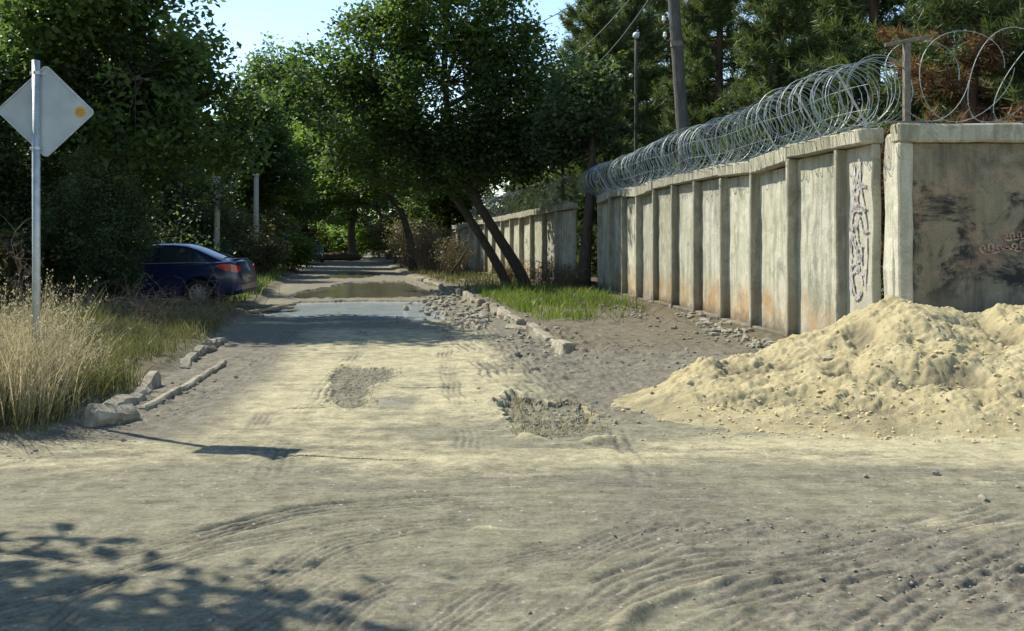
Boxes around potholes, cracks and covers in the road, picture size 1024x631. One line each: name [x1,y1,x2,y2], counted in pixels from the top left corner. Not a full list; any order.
crack [264,453,425,462]
pothole [317,364,410,411]
pothole [489,390,611,441]
pothole [280,280,445,299]
